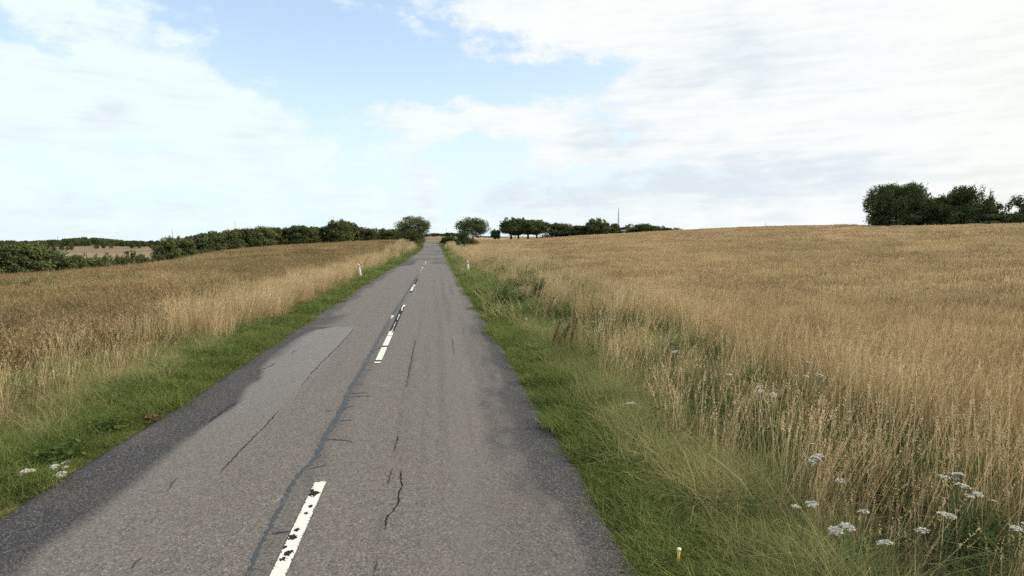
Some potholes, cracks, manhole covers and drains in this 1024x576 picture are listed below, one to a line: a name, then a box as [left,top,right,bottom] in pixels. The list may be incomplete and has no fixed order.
crack [384,469,403,530]
crack [292,329,354,383]
crack [208,401,281,474]
